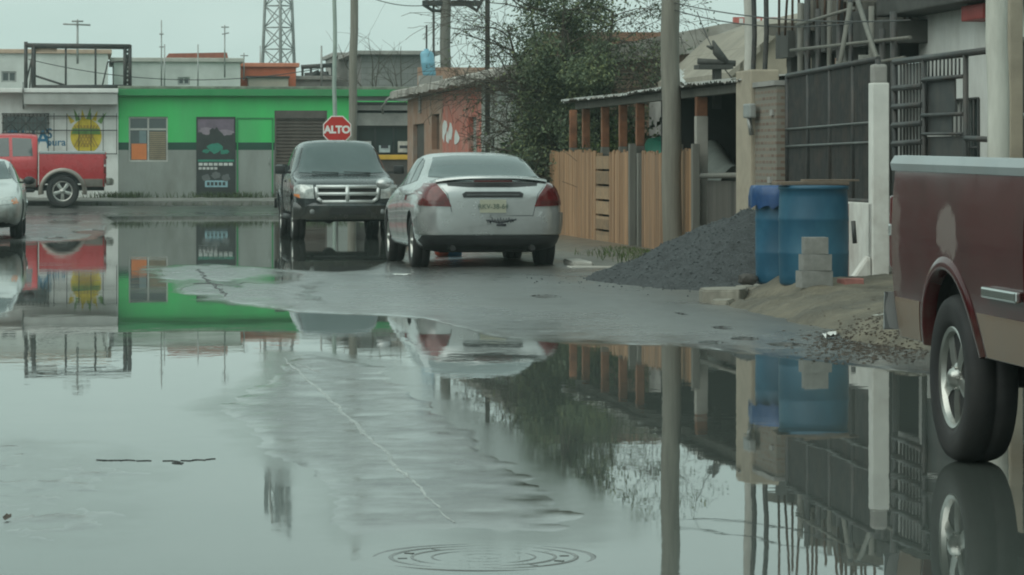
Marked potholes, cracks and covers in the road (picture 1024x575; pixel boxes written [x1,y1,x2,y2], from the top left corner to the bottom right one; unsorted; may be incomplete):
manhole cover [372,544,596,571]
crack [193,269,228,296]
